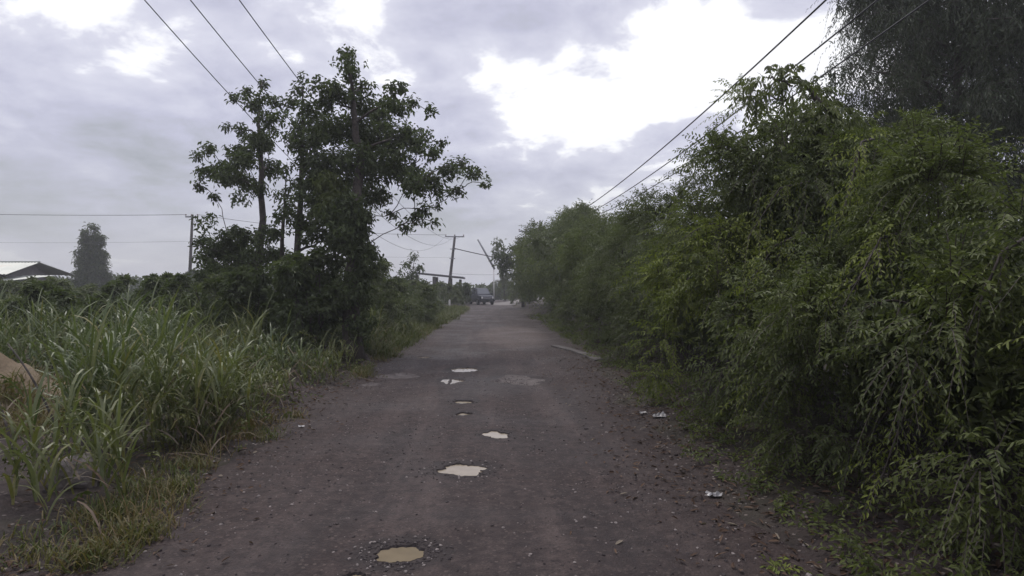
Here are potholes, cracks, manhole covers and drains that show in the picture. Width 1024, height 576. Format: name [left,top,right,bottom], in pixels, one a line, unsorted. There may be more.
pothole [475,425,516,441]
pothole [347,534,456,575]
